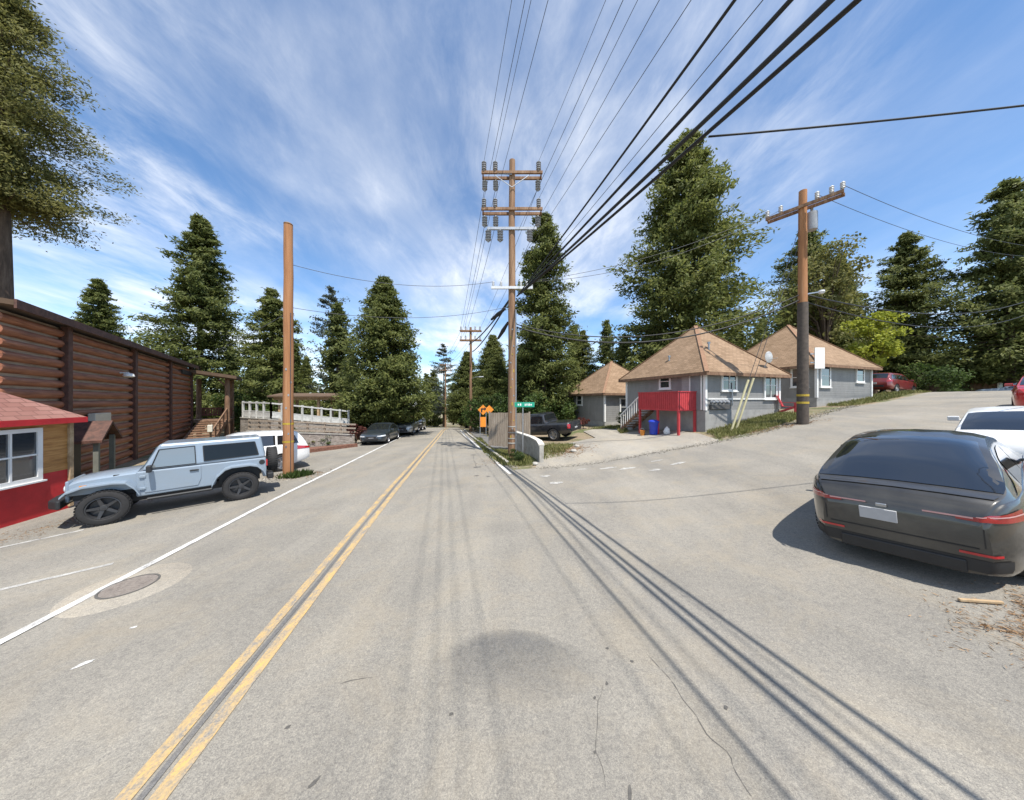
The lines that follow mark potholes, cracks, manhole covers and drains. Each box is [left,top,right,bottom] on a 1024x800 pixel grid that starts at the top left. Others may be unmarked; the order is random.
crack [647,654,750,794]
